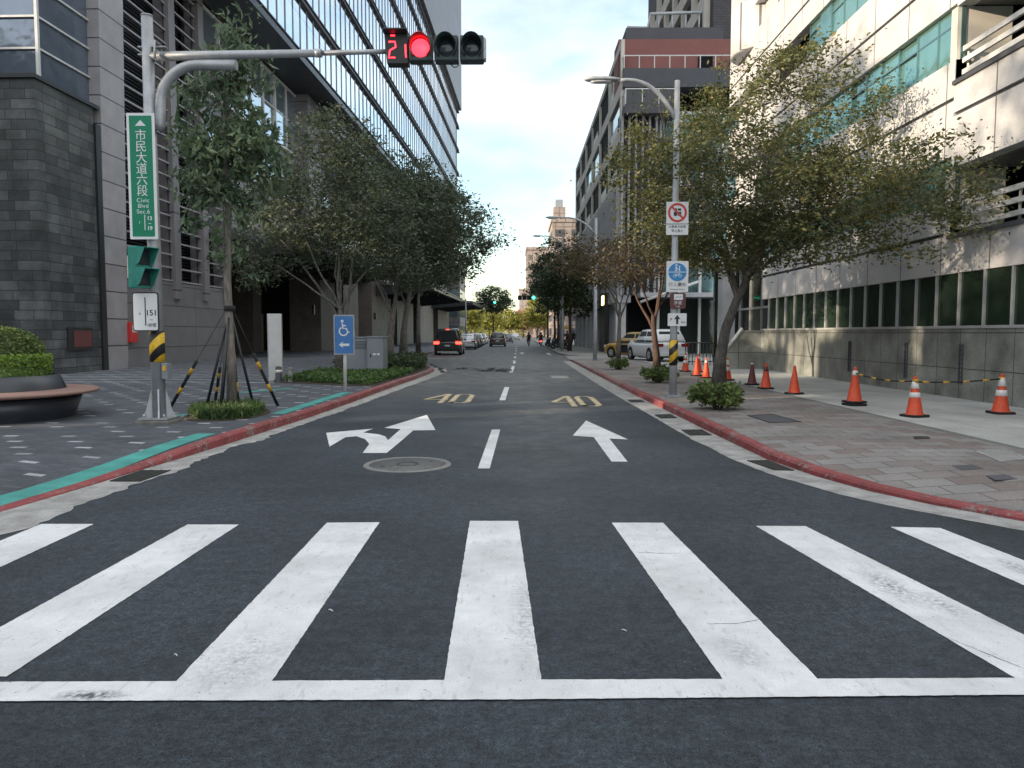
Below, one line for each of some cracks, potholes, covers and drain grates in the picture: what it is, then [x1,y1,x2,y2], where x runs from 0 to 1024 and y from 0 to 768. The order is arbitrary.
manhole cover [747,414,802,423]
drain grate [110,470,171,482]
drain grate [747,460,794,471]
manhole cover [363,457,451,473]
